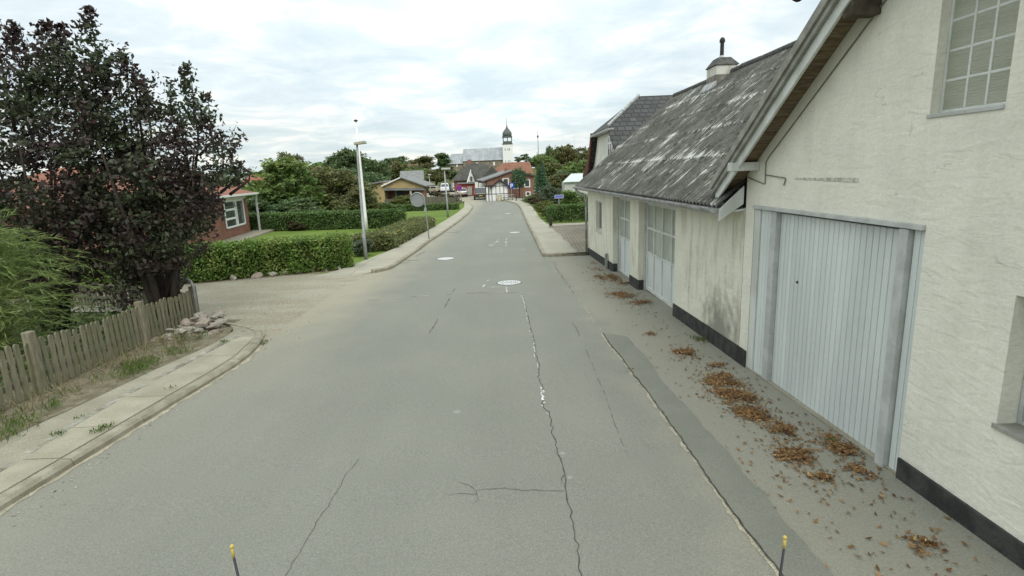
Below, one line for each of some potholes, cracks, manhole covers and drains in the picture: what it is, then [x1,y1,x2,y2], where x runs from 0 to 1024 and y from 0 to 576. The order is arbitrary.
crack [556,268,626,451]
crack [285,460,358,576]
crack [378,292,582,576]
